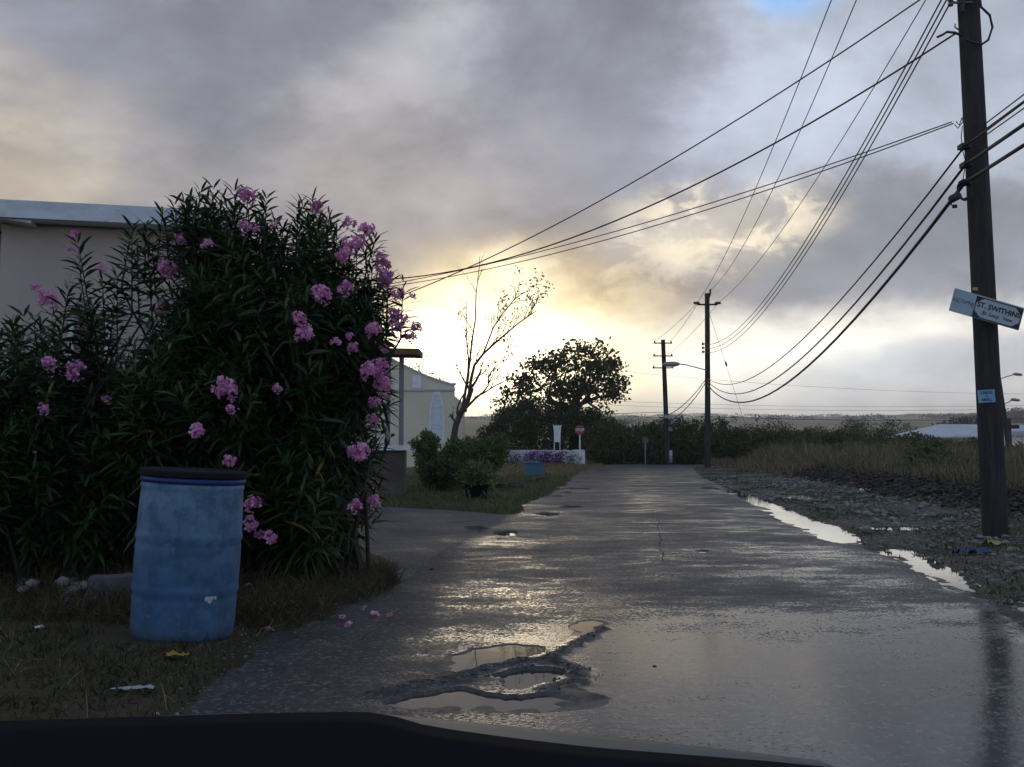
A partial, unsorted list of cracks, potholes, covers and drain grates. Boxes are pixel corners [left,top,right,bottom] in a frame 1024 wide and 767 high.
crack [657,512,665,561]
pothole [490,666,568,689]
pothole [442,643,546,672]
pothole [377,686,612,714]
pothole [568,619,608,636]
